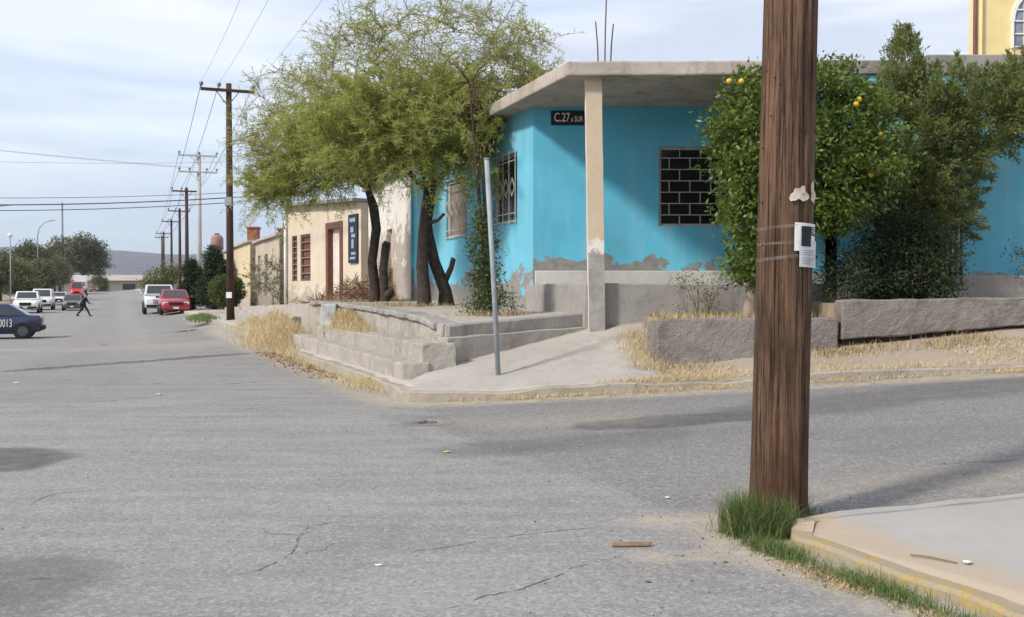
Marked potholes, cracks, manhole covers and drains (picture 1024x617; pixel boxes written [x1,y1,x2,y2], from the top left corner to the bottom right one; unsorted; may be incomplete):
crack [448,556,620,608]
crack [244,522,347,574]
